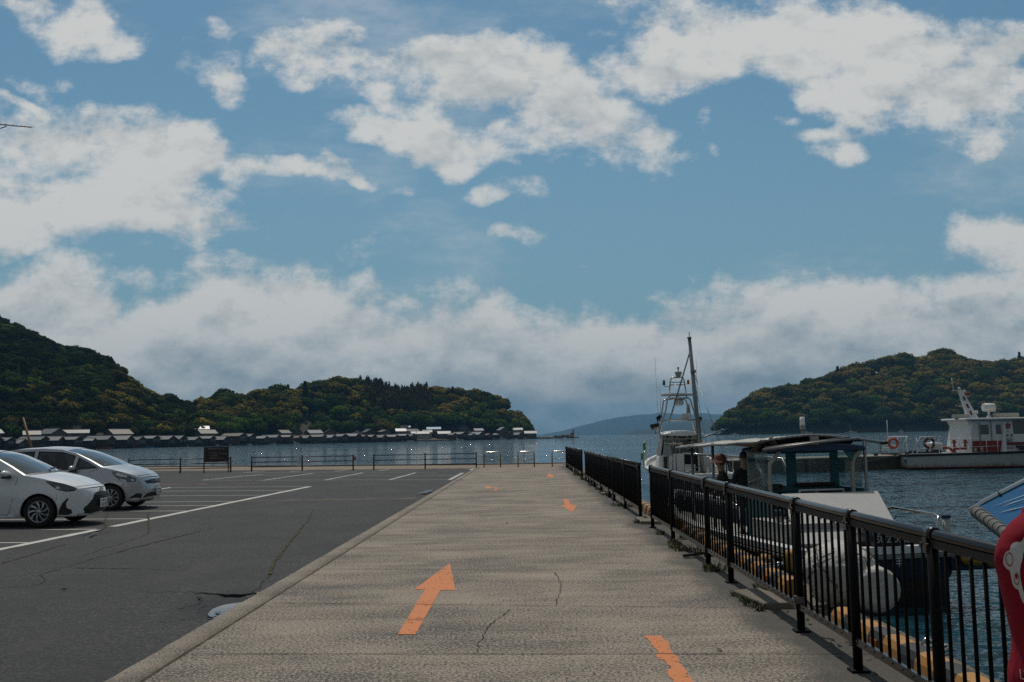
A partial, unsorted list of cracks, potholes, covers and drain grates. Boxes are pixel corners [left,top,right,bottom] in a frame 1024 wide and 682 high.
crack [252,510,314,592]
crack [5,511,211,588]
